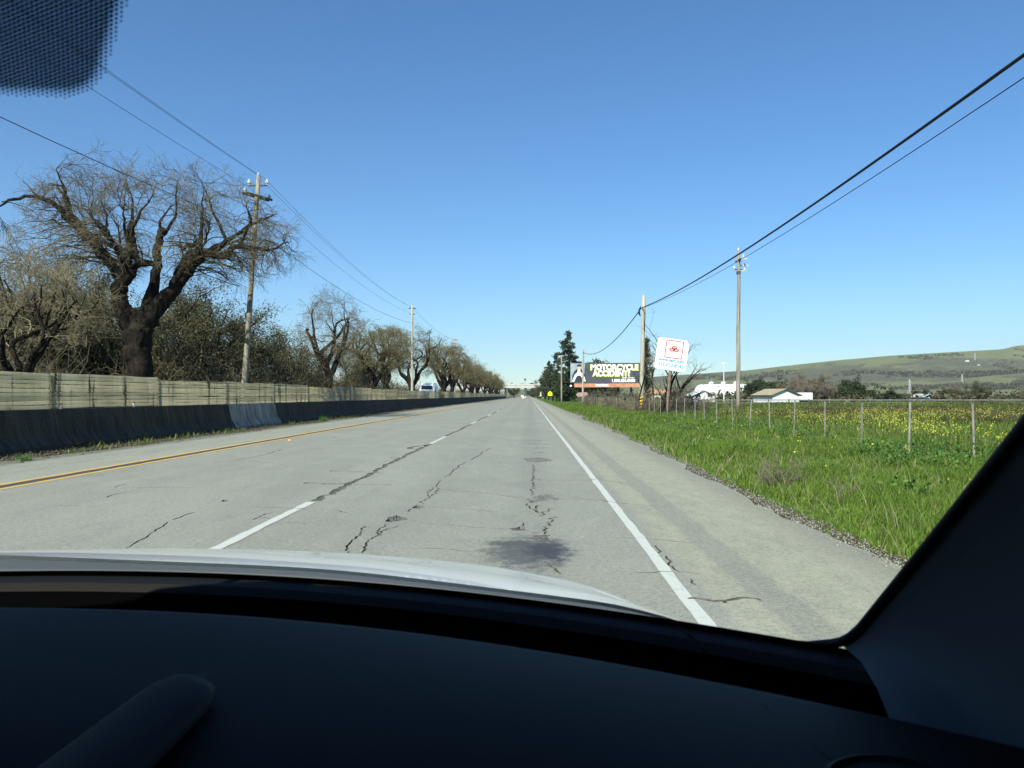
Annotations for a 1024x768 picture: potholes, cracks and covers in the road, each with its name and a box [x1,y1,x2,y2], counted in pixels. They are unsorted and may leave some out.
crack [621,537,761,603]
crack [337,440,651,553]
crack [127,512,194,548]
